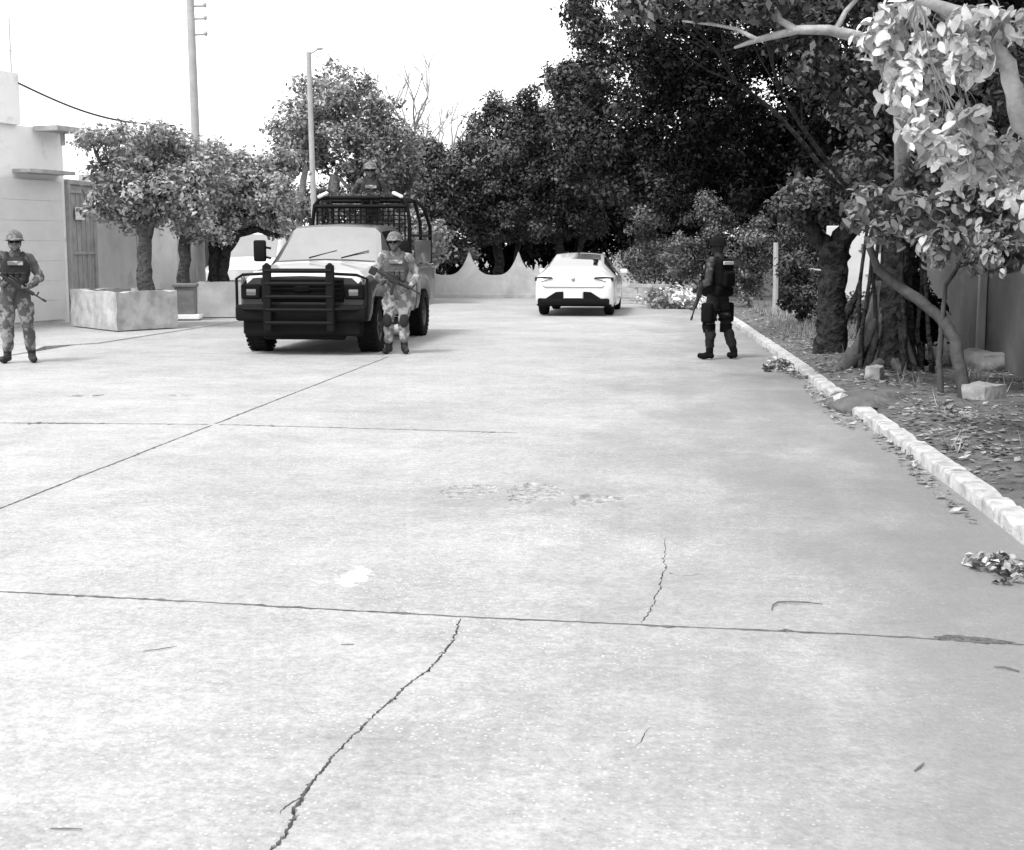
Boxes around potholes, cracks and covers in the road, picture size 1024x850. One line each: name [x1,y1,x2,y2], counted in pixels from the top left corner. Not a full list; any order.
crack [270,619,461,850]
crack [641,540,708,623]
